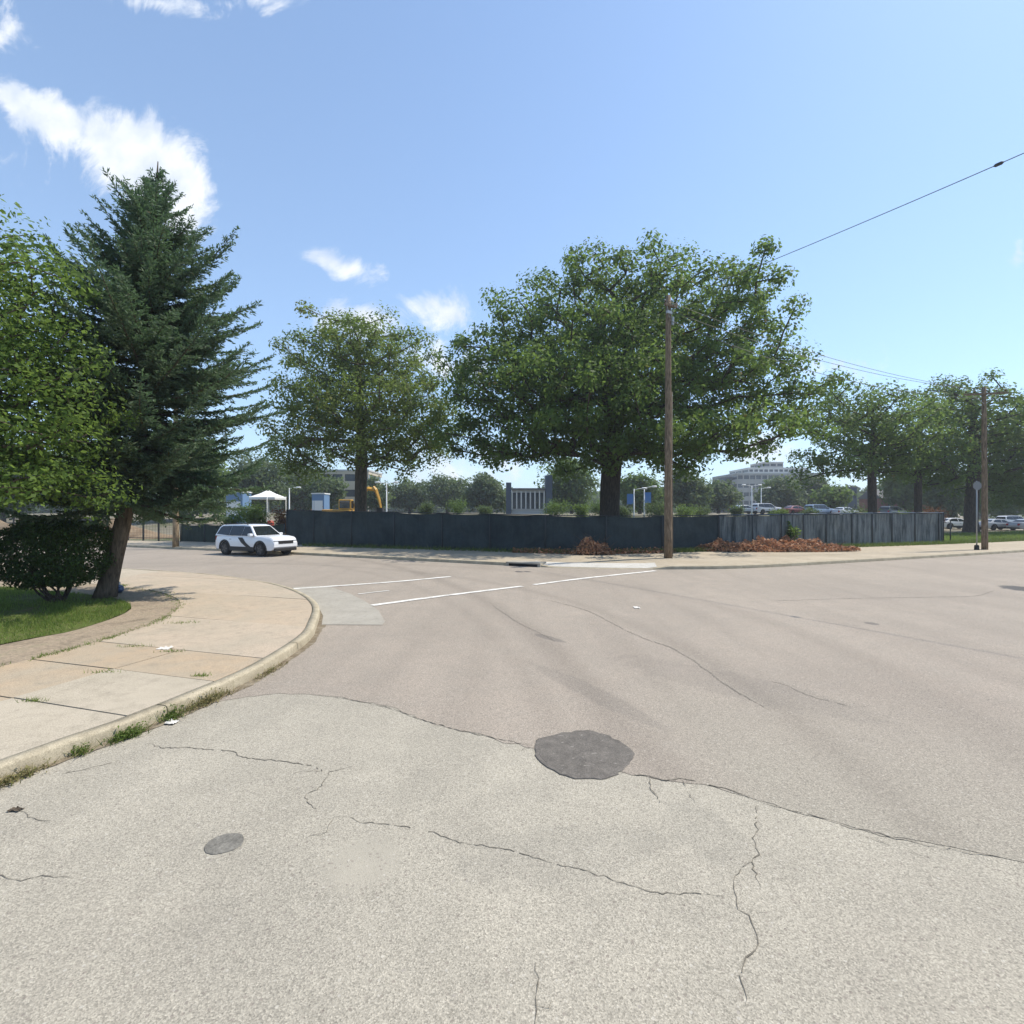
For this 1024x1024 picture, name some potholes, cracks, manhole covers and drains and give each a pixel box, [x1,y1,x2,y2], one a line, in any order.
crack [310,805,761,1005]
manhole cover [204,833,244,855]
crack [149,743,352,808]
